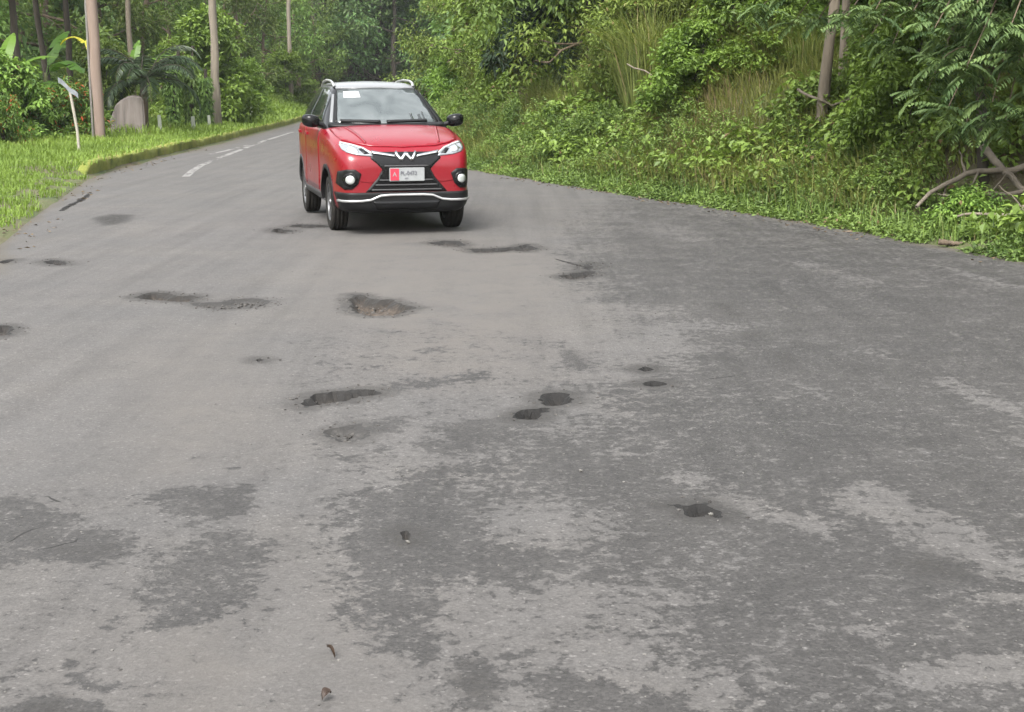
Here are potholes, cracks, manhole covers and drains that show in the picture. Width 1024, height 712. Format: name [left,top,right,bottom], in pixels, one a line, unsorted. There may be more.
pothole [302,422,380,443]
pothole [510,401,569,421]
pothole [337,291,432,318]
pothole [119,291,208,304]
pothole [632,381,674,390]
pothole [519,389,599,406]
pothole [651,495,750,518]
pothole [423,239,475,248]
crack [59,193,92,211]
pothole [180,296,282,312]
pothole [0,323,29,340]
pothole [284,384,393,413]
